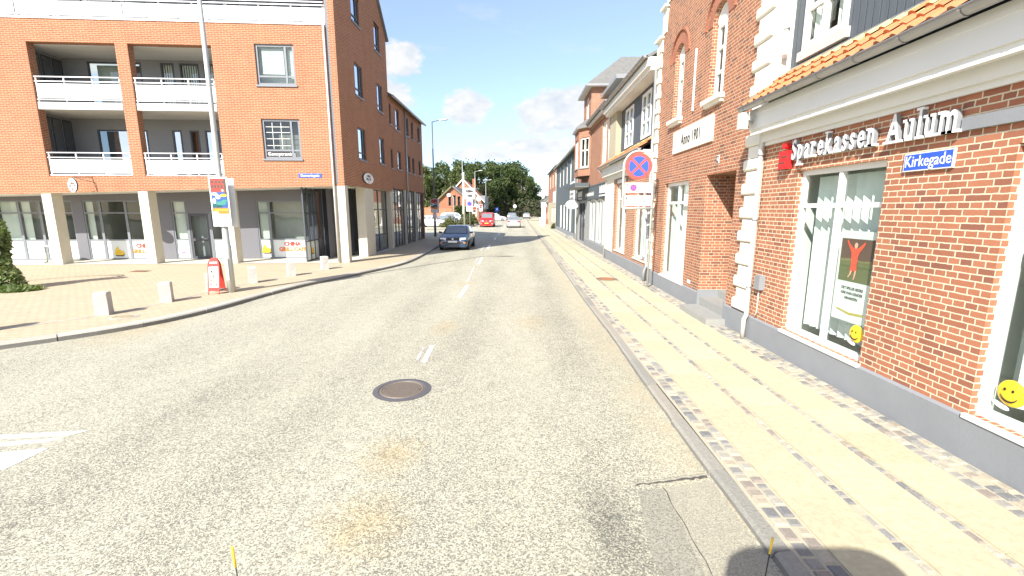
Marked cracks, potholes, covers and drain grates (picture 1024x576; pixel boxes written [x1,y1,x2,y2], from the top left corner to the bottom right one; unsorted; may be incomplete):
manhole cover [372,379,431,402]
